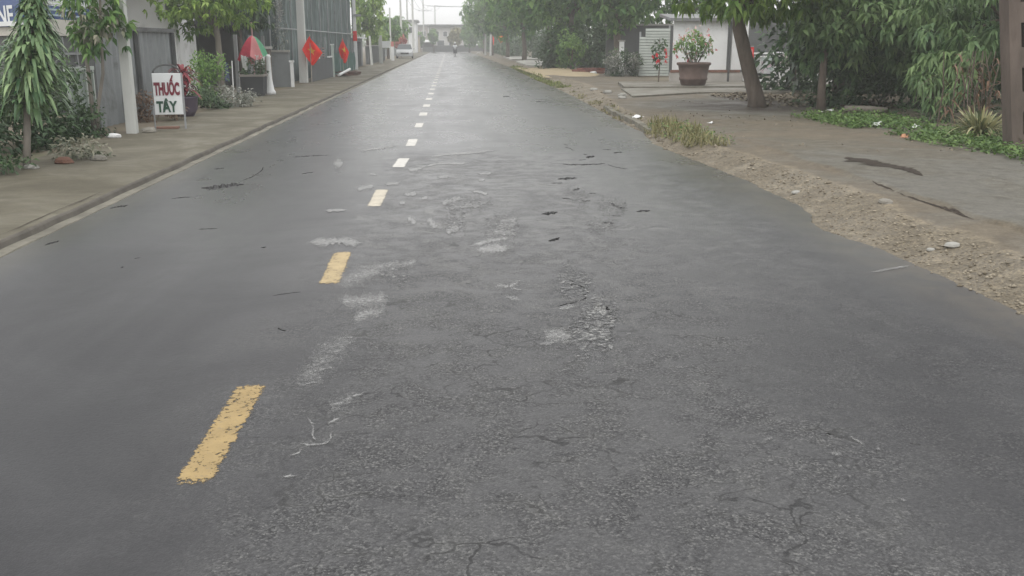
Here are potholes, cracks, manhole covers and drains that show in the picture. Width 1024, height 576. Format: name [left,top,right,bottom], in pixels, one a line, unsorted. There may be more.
crack [293,418,338,455]
